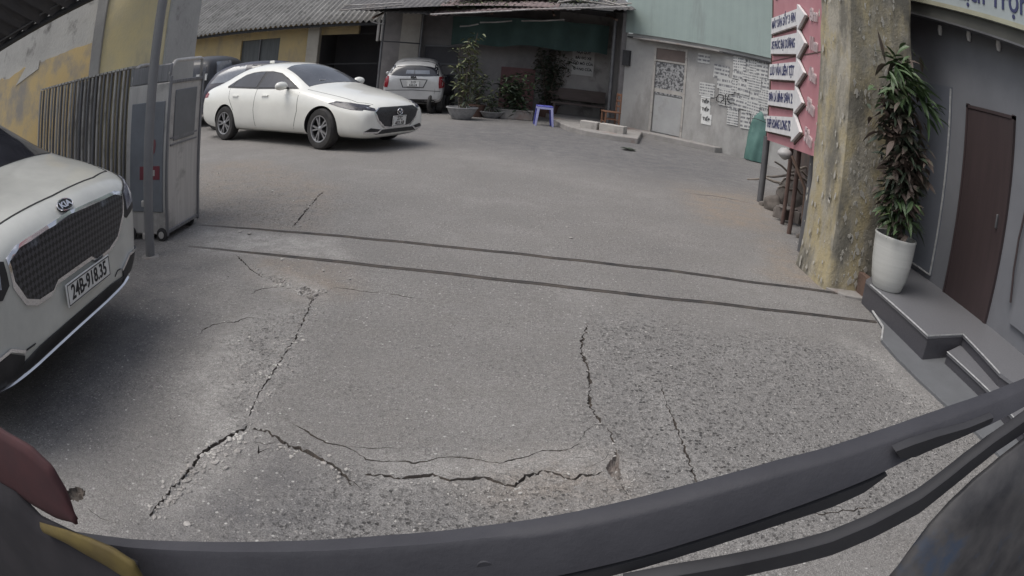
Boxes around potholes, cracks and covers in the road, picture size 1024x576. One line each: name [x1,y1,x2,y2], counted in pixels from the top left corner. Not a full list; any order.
crack [149,299,629,516]
crack [661,387,697,482]
